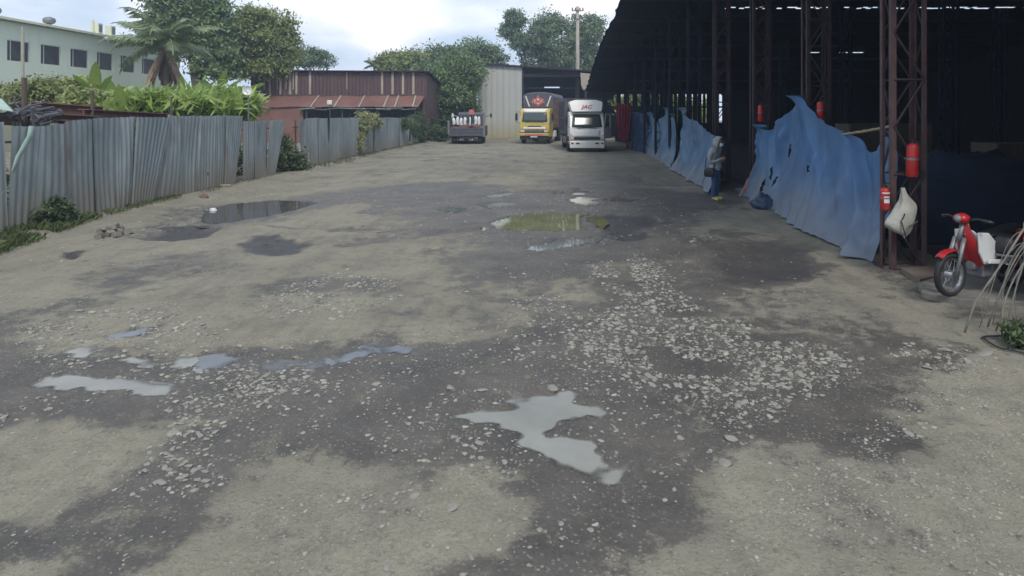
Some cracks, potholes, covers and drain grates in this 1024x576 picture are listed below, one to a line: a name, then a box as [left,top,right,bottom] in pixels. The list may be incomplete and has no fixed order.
pothole [148,345,261,386]
pothole [439,386,644,487]
pothole [19,366,203,403]
pothole [233,345,382,378]
pothole [480,211,609,232]
pothole [516,235,618,254]
pothole [192,198,325,228]
pothole [324,337,430,366]
